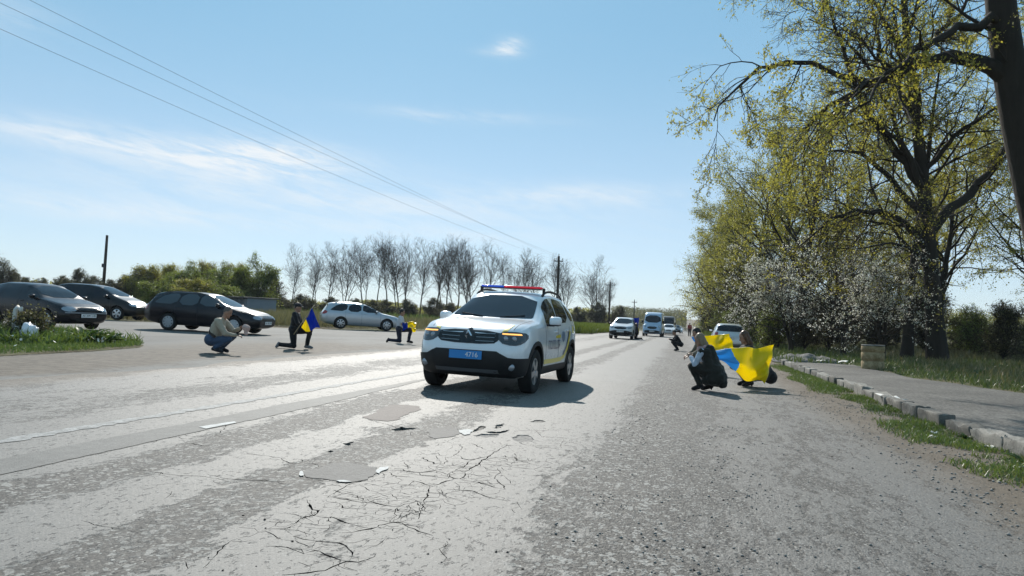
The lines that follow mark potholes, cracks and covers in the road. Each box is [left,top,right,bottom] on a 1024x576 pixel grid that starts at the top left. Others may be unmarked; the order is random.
crack [186,441,572,576]
